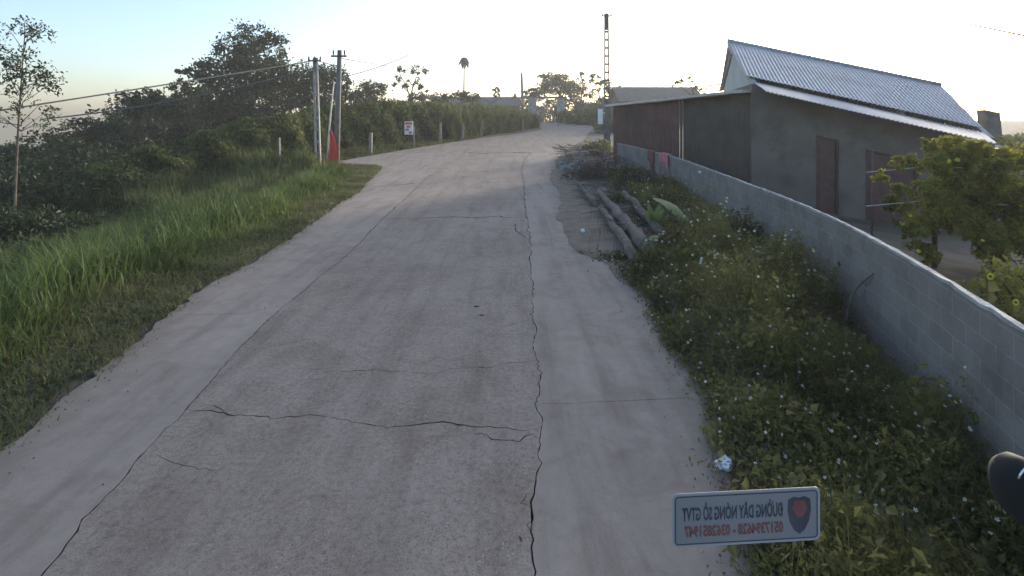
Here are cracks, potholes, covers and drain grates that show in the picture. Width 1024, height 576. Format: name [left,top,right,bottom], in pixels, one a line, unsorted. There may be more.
crack [41,157,543,576]
